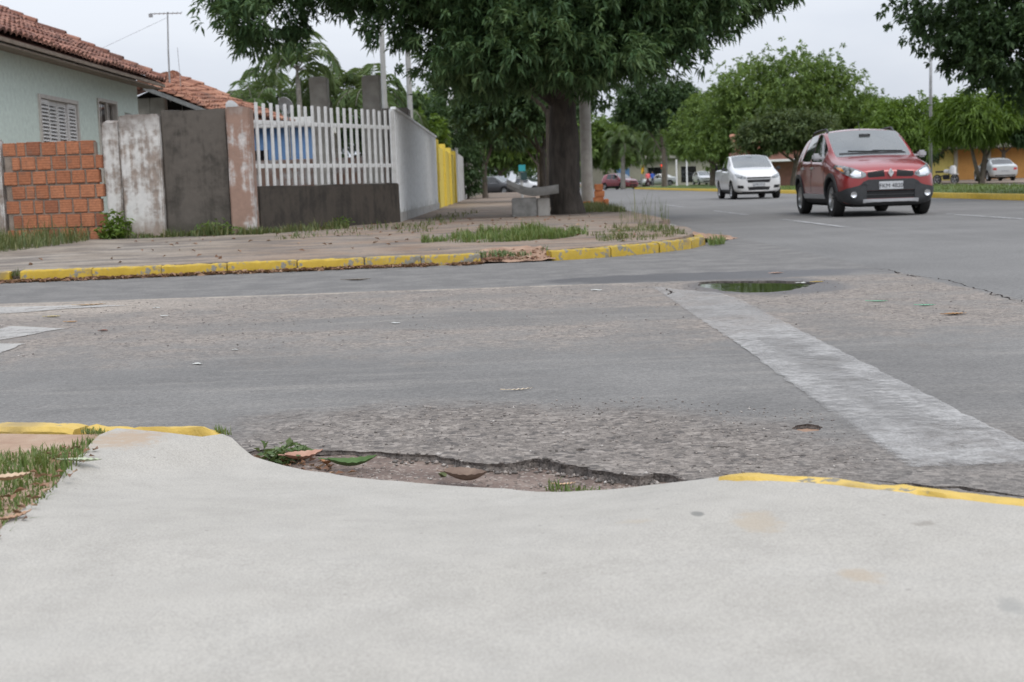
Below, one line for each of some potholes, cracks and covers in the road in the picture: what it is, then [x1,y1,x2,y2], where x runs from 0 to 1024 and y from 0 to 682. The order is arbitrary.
pothole [792,424,823,432]
pothole [248,449,688,492]
